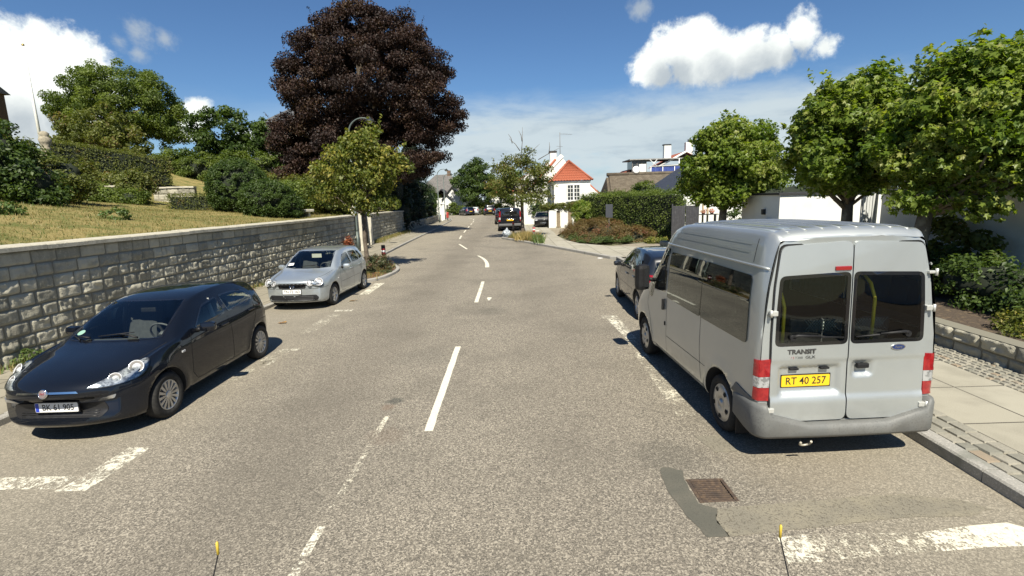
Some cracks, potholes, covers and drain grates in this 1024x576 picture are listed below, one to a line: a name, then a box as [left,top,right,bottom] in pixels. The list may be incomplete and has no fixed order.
drain grate [686,478,739,503]
